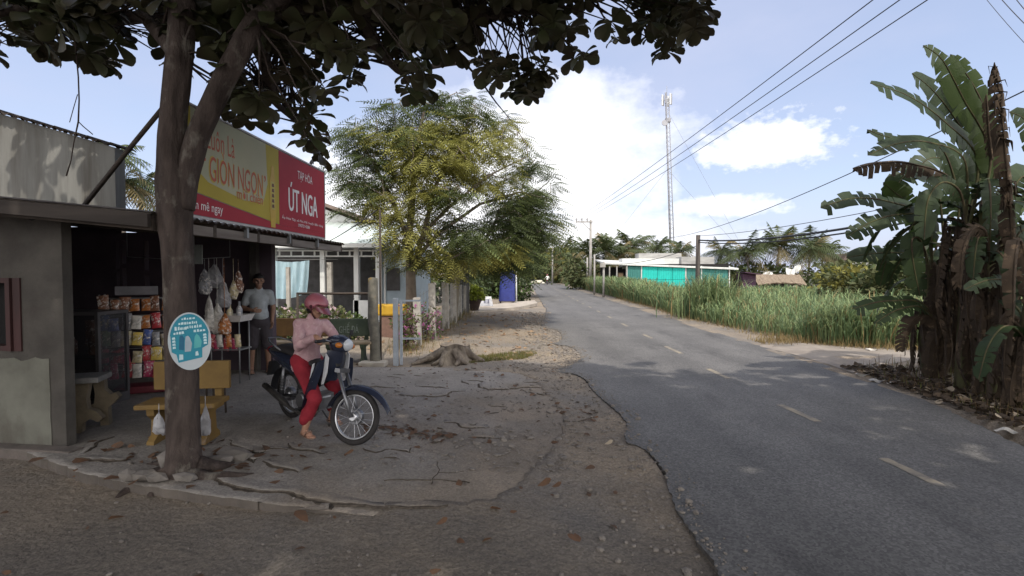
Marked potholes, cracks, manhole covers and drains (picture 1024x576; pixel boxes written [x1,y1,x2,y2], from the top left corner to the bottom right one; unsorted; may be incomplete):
crack [368,373,551,439]
crack [74,436,131,463]
crack [214,438,448,511]
